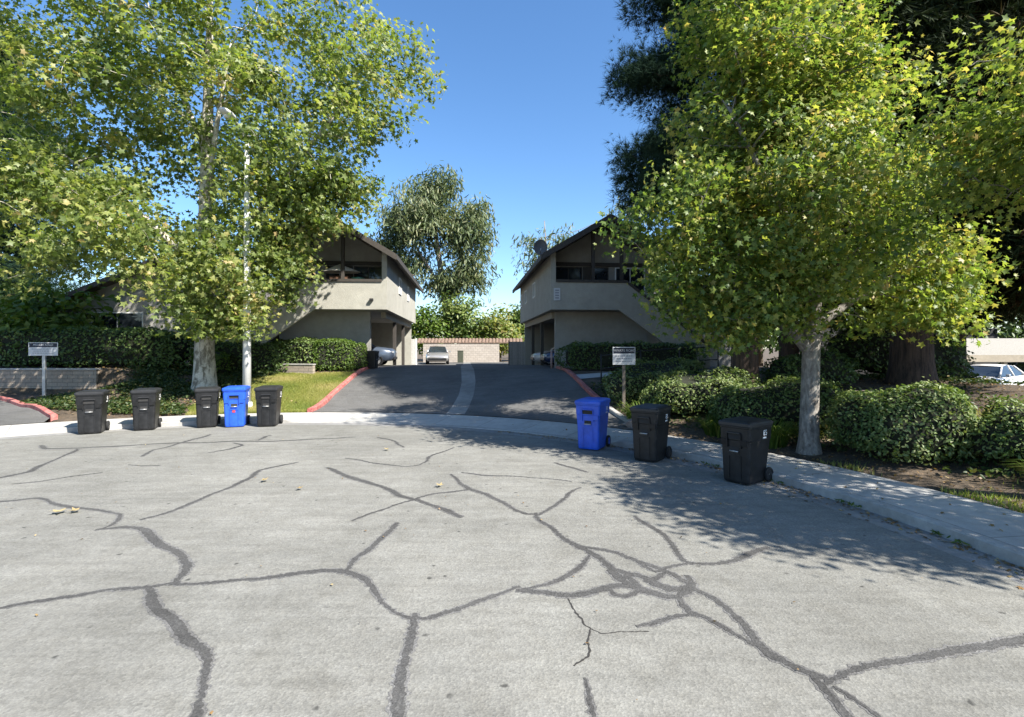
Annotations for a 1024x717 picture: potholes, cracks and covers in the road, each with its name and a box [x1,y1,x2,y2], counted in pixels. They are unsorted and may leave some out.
crack [0,437,1024,717]
